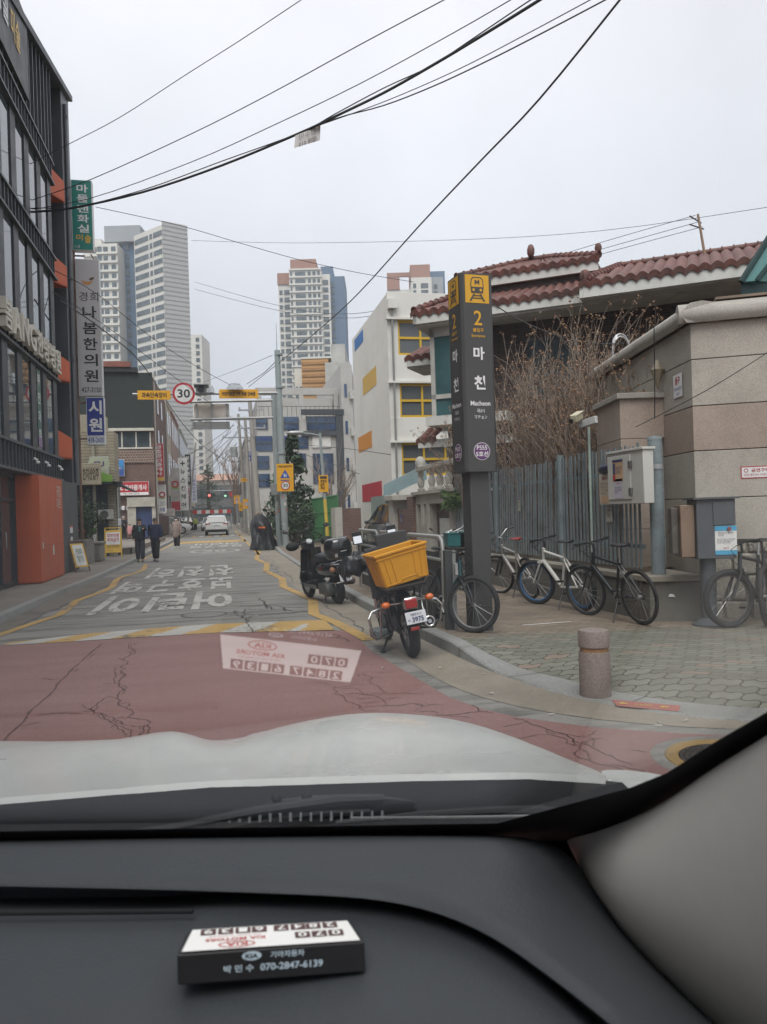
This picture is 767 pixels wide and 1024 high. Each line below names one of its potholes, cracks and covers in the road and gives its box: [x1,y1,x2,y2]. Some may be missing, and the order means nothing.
manhole cover [650,736,723,759]
crack [320,663,490,717]
crack [82,643,151,737]
crack [504,718,644,764]
